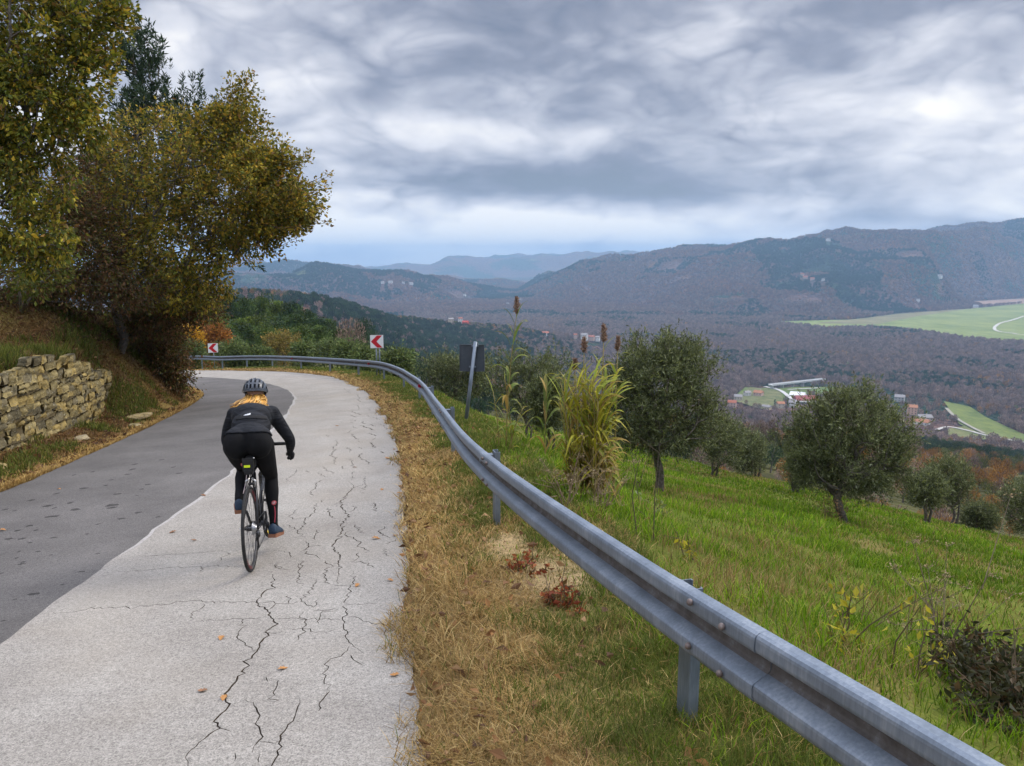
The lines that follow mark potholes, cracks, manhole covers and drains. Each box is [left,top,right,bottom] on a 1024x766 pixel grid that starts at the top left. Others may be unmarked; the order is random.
crack [53,388,397,766]
